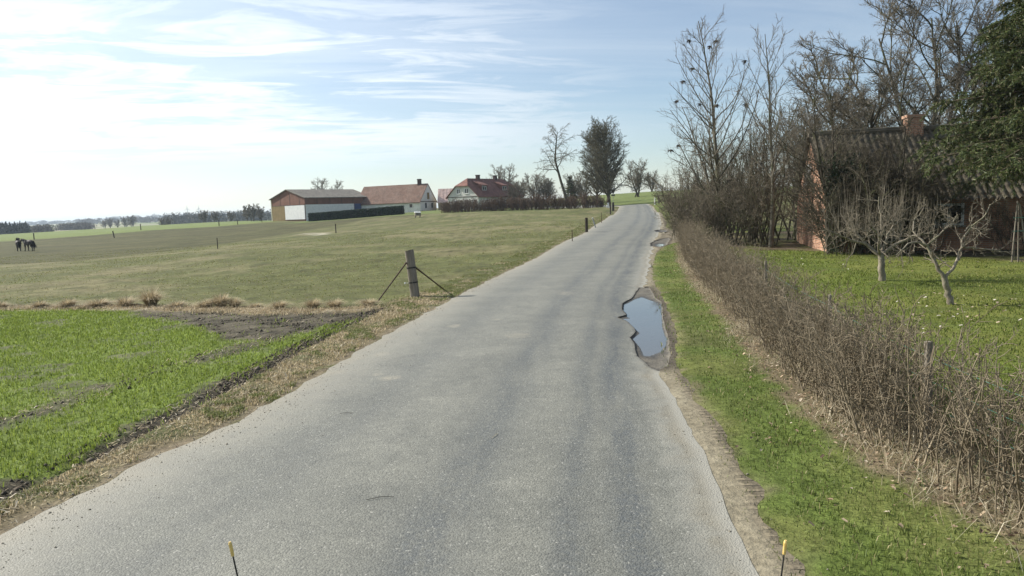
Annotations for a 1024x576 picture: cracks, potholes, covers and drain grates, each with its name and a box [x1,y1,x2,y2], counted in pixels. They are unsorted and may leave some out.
pothole [650,238,670,247]
pothole [619,287,671,371]
